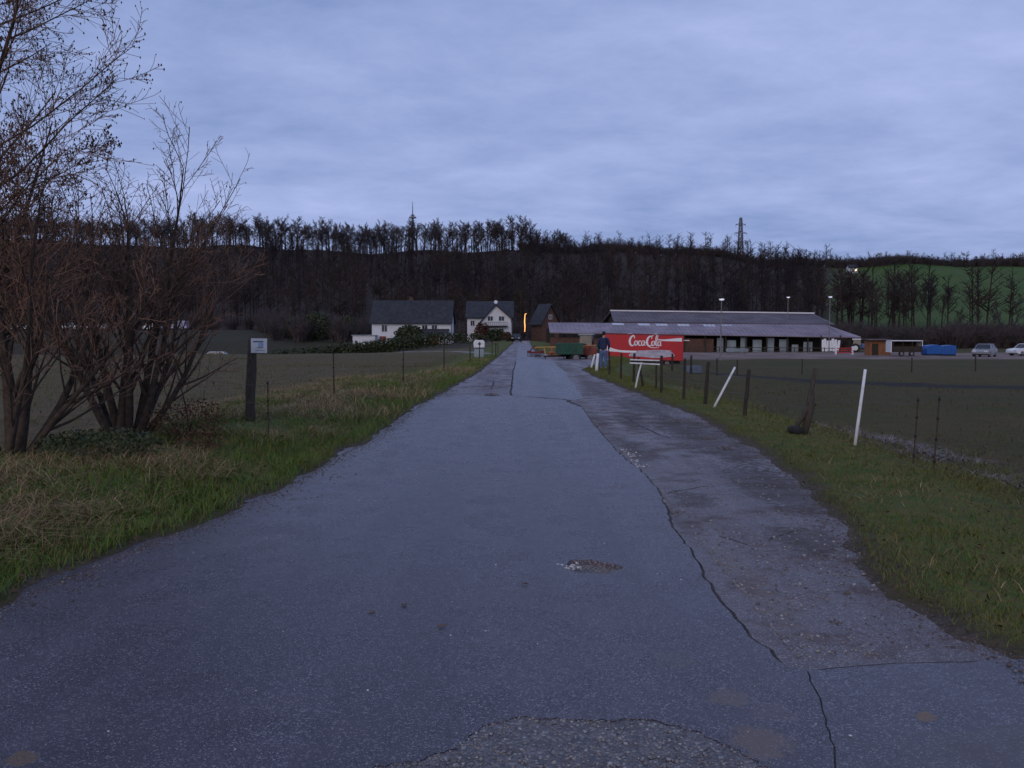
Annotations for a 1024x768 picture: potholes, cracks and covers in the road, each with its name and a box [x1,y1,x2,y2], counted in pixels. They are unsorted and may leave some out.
crack [807,661,977,768]
pothole [556,559,623,574]
crack [479,362,516,396]
